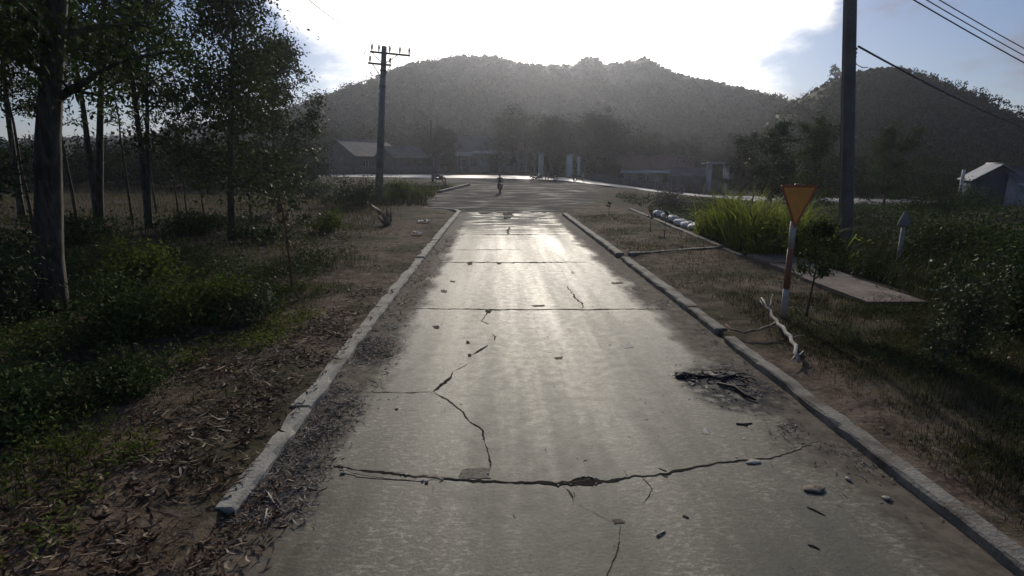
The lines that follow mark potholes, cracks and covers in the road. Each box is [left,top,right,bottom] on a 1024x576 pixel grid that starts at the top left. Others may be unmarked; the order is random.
crack [326,310,822,576]
